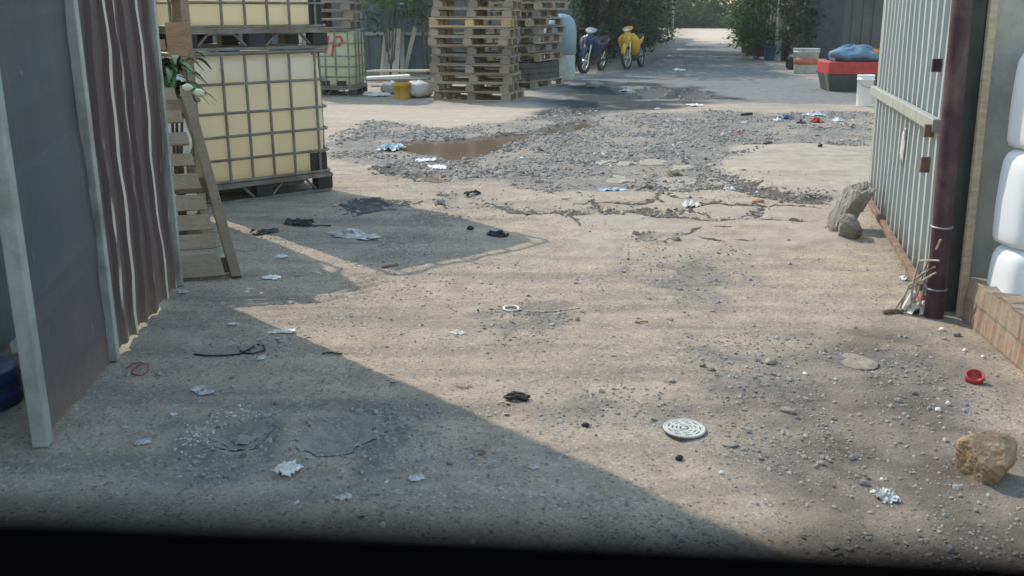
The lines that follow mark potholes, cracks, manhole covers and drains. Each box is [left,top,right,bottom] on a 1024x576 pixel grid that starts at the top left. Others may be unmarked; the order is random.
pothole [401,132,536,161]
crack [480,174,827,242]
pothole [410,171,449,183]
pothole [537,119,594,134]
pothole [377,163,407,176]
